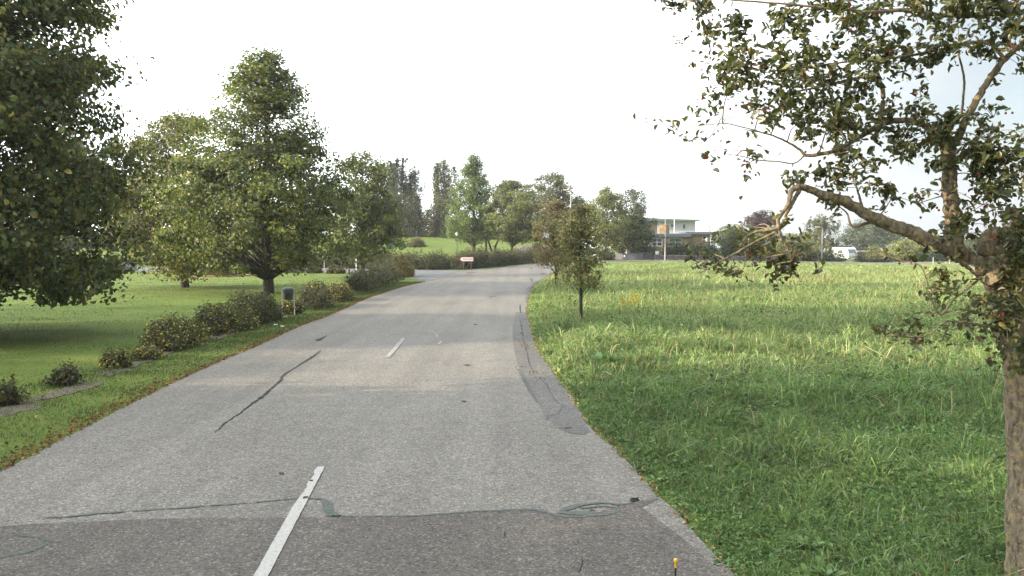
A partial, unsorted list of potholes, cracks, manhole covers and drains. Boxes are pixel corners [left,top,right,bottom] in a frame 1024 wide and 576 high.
crack [214,335,327,433]
